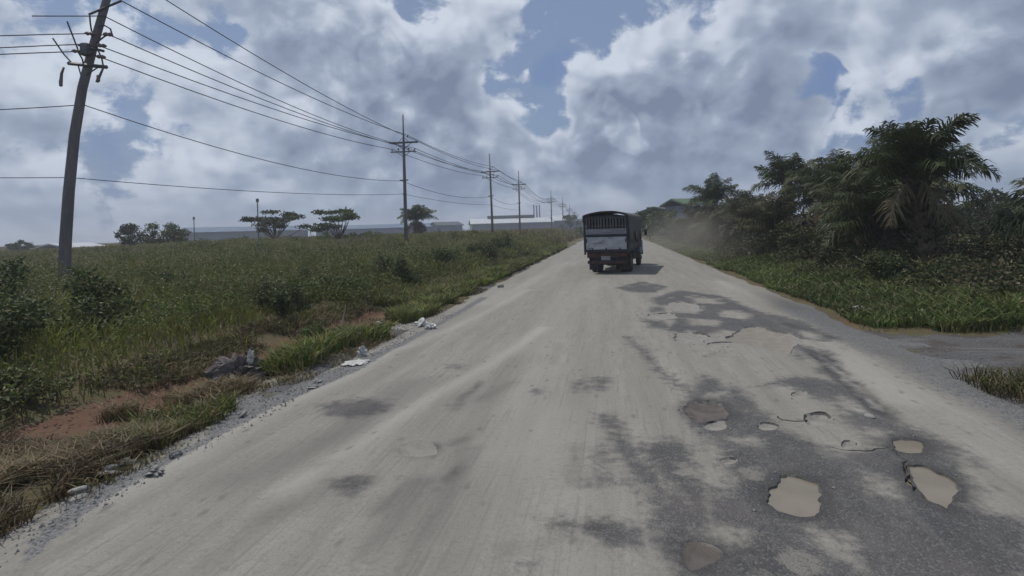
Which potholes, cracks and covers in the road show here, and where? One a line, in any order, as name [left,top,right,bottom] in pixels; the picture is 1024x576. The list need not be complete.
pothole [841,440,857,449]
pothole [703,421,728,430]
pothole [683,542,723,570]
pothole [892,438,925,453]
pothole [803,411,831,426]
pothole [682,399,729,423]
pothole [757,422,779,430]
pothole [766,473,824,517]
pothole [905,464,962,508]
pothole [399,440,437,457]
